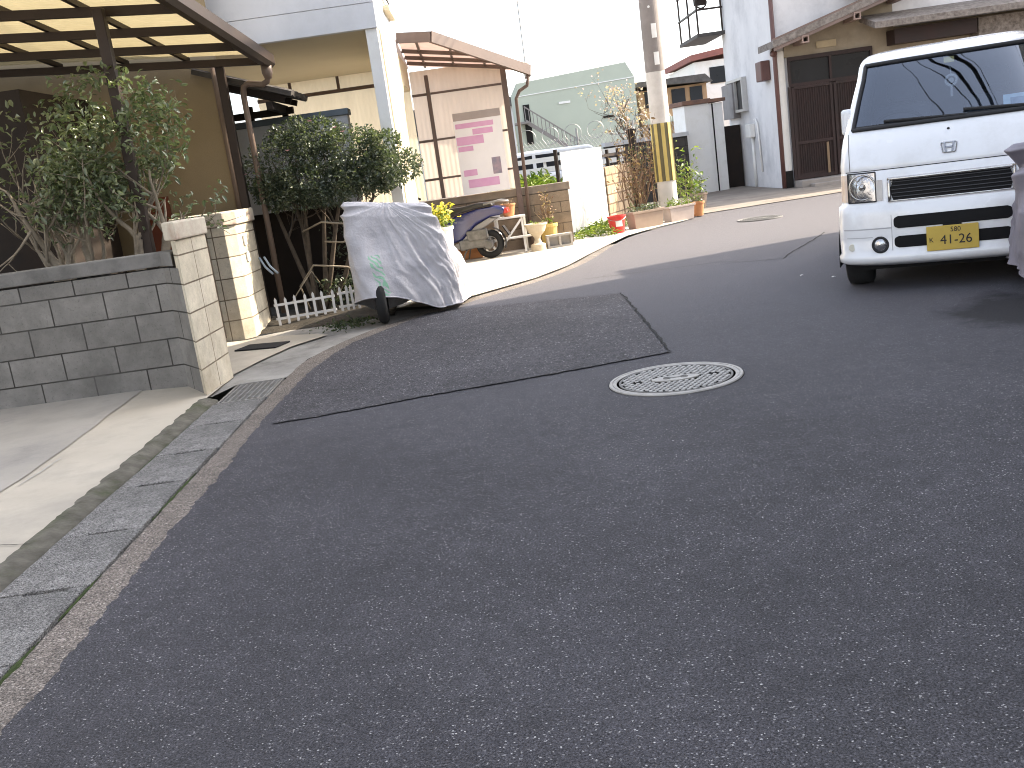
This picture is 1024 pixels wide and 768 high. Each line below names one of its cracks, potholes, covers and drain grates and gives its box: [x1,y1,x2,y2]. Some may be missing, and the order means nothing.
manhole cover [609,362,744,397]
drain grate [216,378,285,404]
